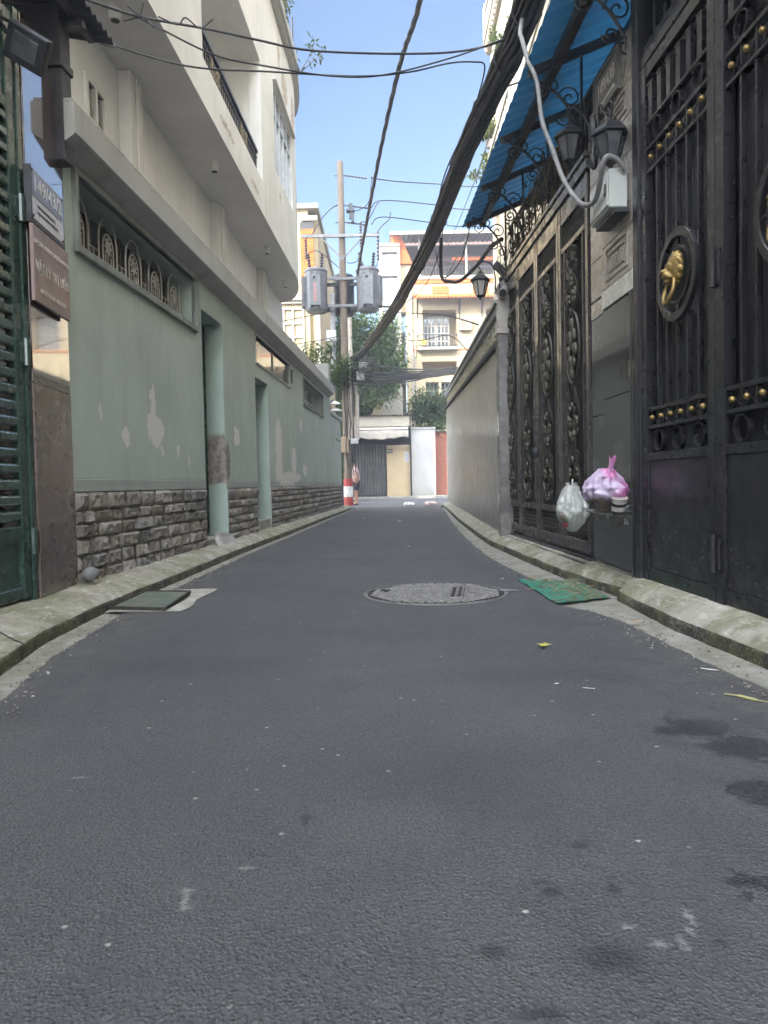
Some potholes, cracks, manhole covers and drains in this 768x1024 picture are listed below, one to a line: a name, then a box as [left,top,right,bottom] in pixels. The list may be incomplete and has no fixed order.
manhole cover [363,583,520,605]
